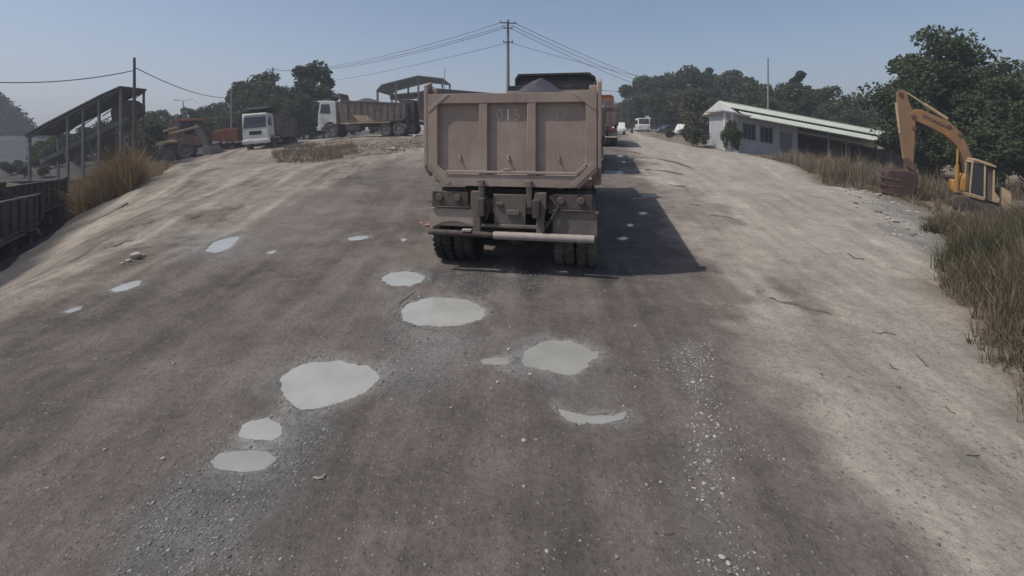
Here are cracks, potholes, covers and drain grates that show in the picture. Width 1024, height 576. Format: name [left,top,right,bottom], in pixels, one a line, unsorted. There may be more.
pothole [376,269,430,287]
pothole [506,336,607,378]
pothole [106,279,145,293]
pothole [270,355,387,419]
pothole [226,411,293,450]
pothole [61,305,86,314]
pothole [201,235,243,253]
pothole [554,407,630,427]
pothole [205,448,281,475]
pothole [477,356,509,366]
pothole [391,293,491,328]
